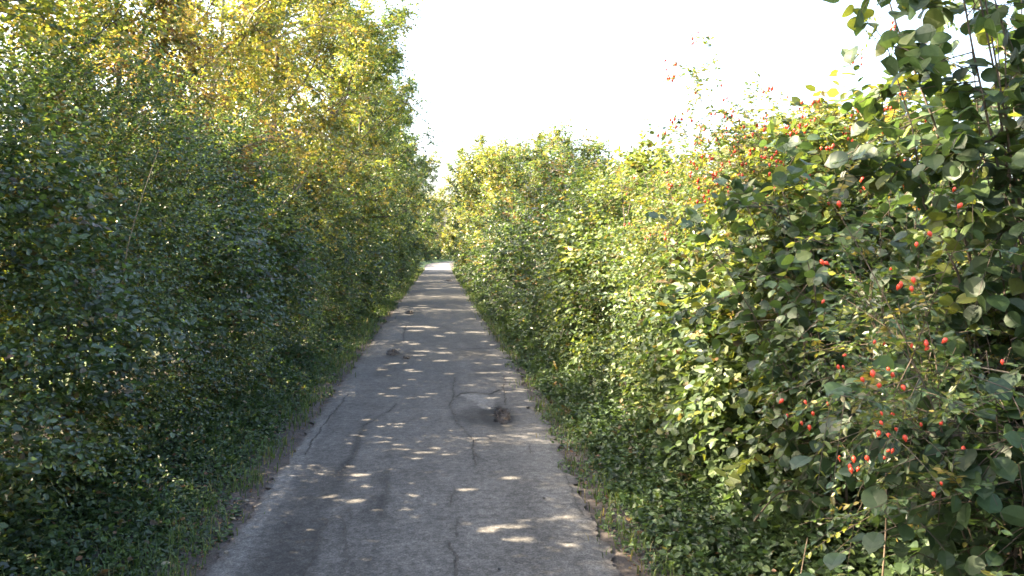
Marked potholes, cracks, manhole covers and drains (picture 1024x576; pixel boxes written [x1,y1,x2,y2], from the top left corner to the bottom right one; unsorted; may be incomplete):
crack [448,490,460,576]
crack [304,394,397,474]
crack [449,376,508,466]
pothole [489,405,514,425]
